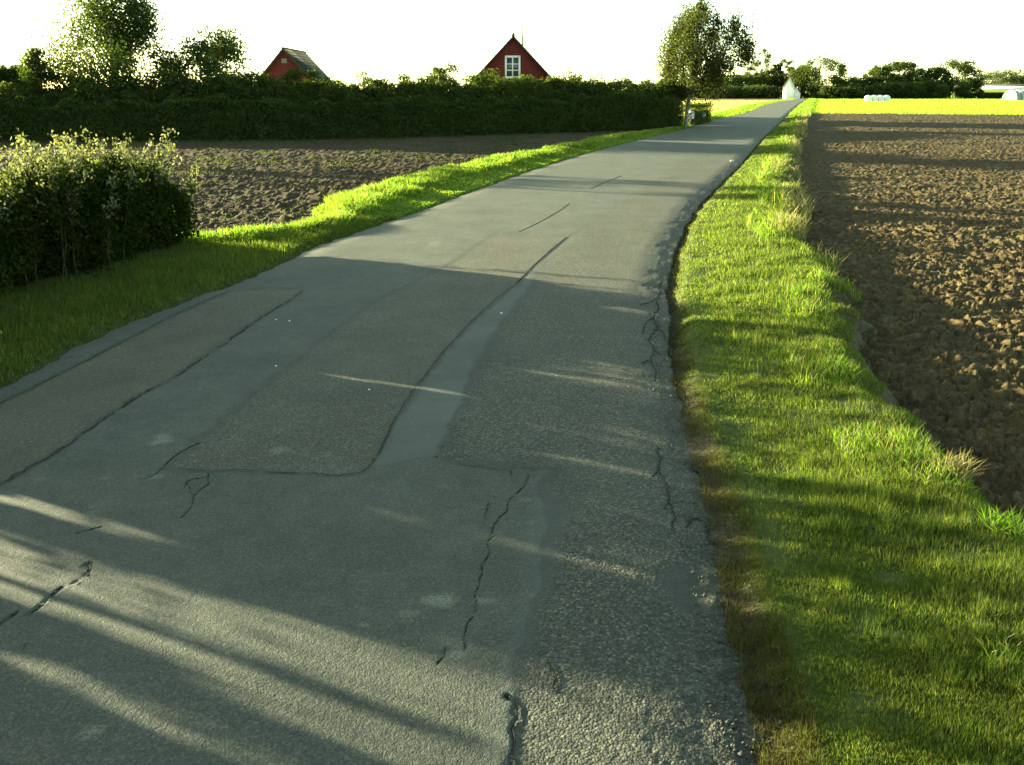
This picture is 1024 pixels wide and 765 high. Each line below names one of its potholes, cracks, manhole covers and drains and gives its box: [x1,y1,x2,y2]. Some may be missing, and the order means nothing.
crack [463,471,529,644]
crack [640,280,666,381]
crack [653,449,711,543]
crack [511,700,519,765]
crack [0,562,92,623]
